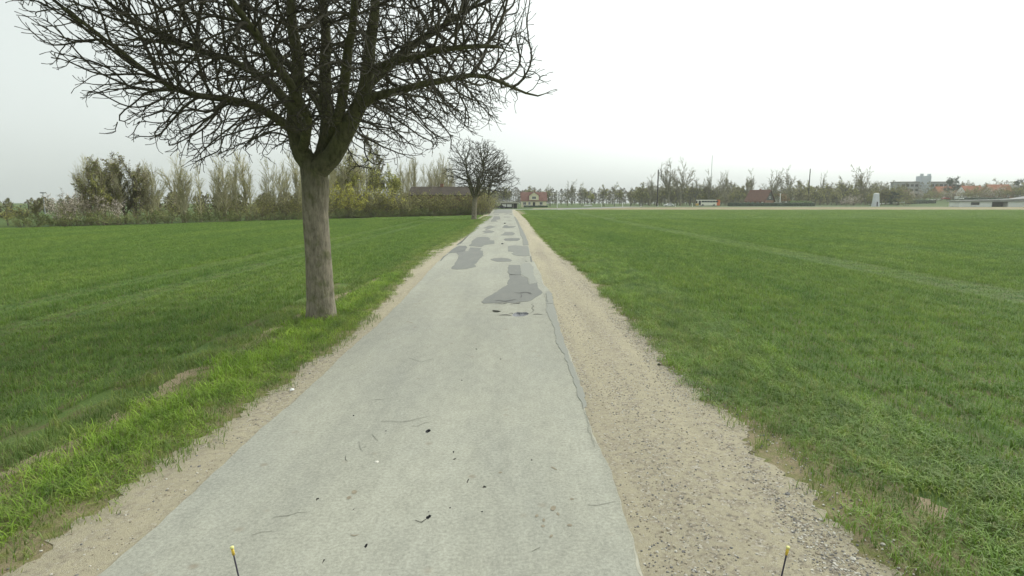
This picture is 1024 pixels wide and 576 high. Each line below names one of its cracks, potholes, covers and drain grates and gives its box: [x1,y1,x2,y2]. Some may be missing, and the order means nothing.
crack [496,292,546,316]
